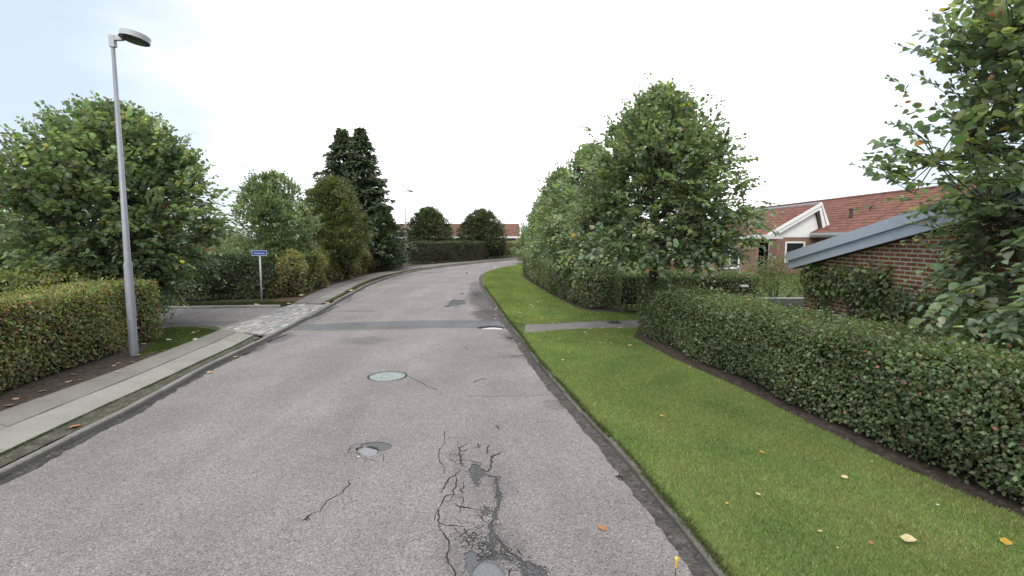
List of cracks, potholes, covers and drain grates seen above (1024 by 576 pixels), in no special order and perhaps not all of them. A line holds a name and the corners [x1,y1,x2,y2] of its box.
pothole [356,442,392,456]
crack [434,422,553,576]
manhole cover [367,372,408,382]
crack [302,444,387,521]
